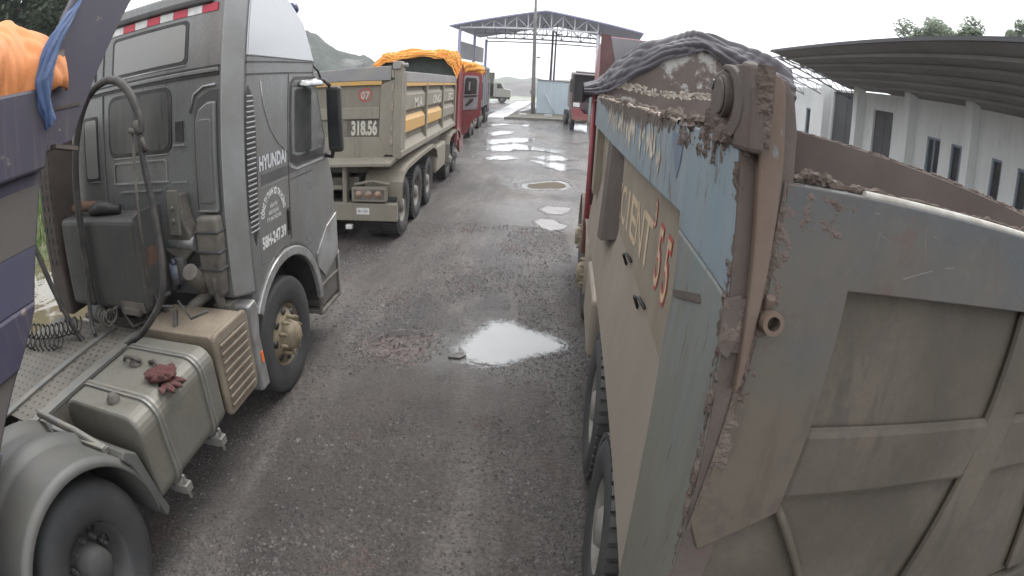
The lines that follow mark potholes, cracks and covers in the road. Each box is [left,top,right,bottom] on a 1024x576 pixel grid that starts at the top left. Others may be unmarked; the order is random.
pothole [537,206,574,216]
pothole [454,320,569,369]
pothole [510,179,580,192]
pothole [531,218,572,232]
